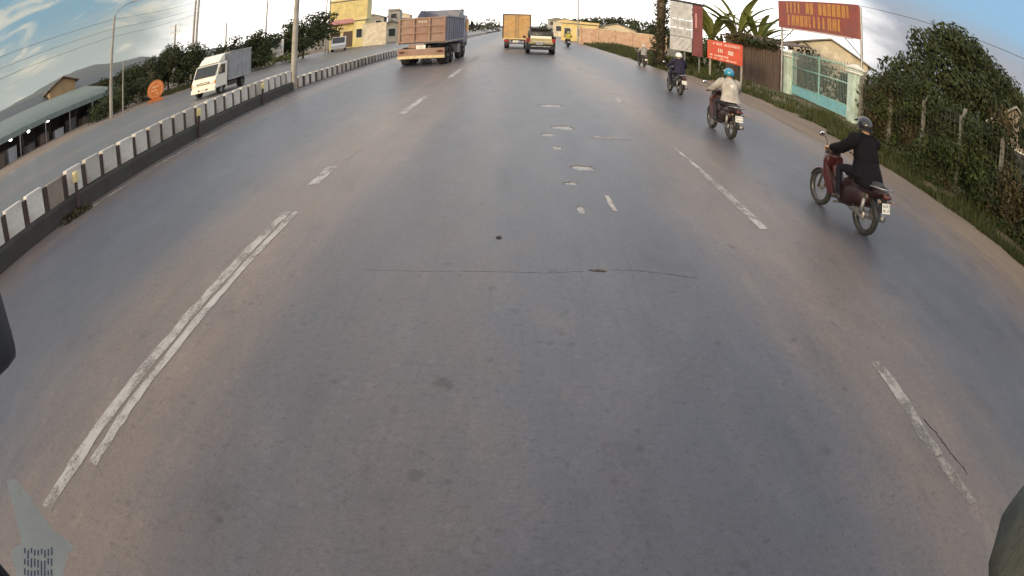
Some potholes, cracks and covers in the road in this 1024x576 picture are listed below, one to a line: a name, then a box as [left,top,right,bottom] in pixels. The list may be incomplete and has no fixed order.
crack [924,419,968,475]
